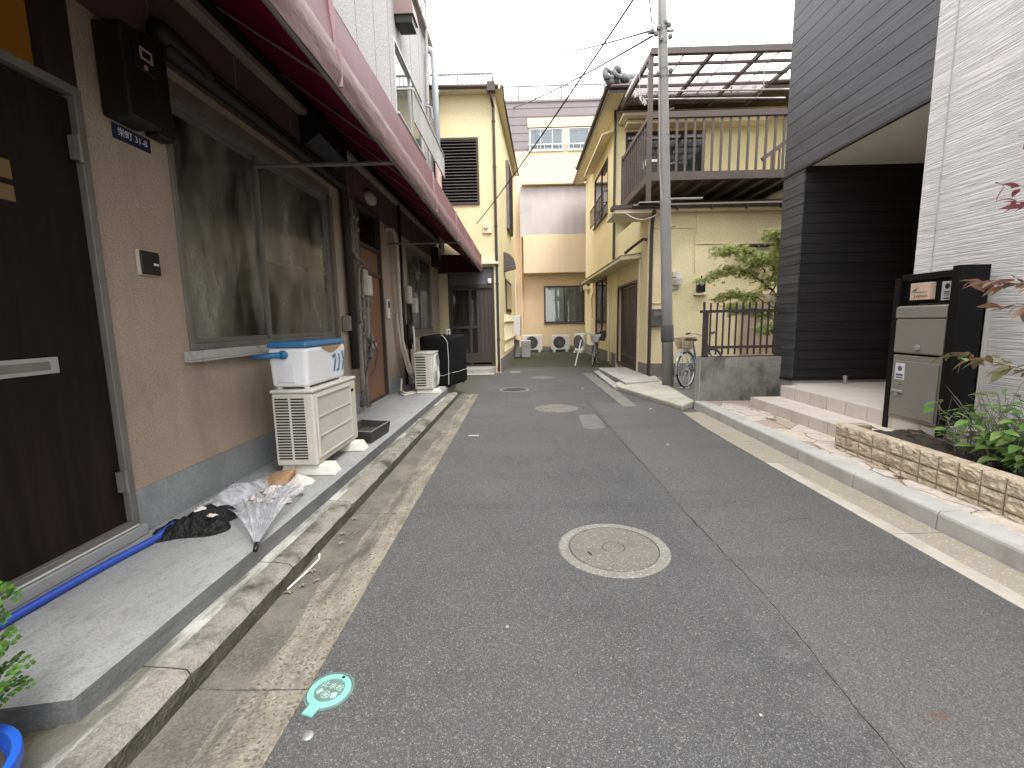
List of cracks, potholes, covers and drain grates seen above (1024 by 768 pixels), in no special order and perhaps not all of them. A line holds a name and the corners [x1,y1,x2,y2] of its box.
manhole cover [558,524,671,578]
manhole cover [535,404,578,412]
